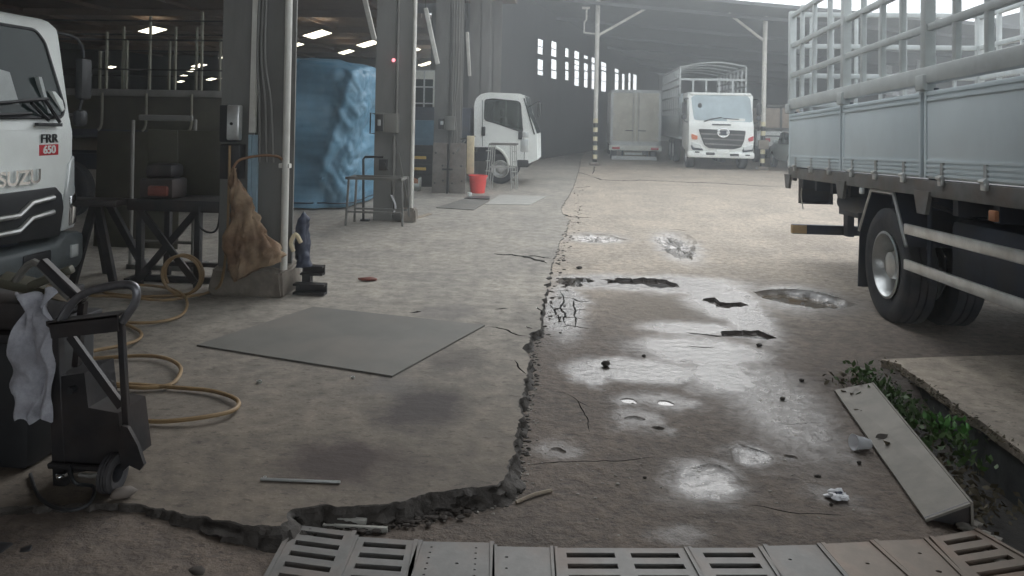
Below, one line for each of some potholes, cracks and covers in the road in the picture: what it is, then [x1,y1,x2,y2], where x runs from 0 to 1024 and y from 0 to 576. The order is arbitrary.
drain grate [929,528,1024,576]
drain grate [264,525,357,576]
pothole [564,233,628,243]
pothole [721,330,776,340]
crack [497,254,546,263]
pothole [702,297,748,309]
pothole [655,232,697,261]
crack [496,292,588,336]
pothole [601,277,679,288]
pothole [729,444,774,467]
drain grate [340,535,418,576]
pothole [555,277,594,288]
